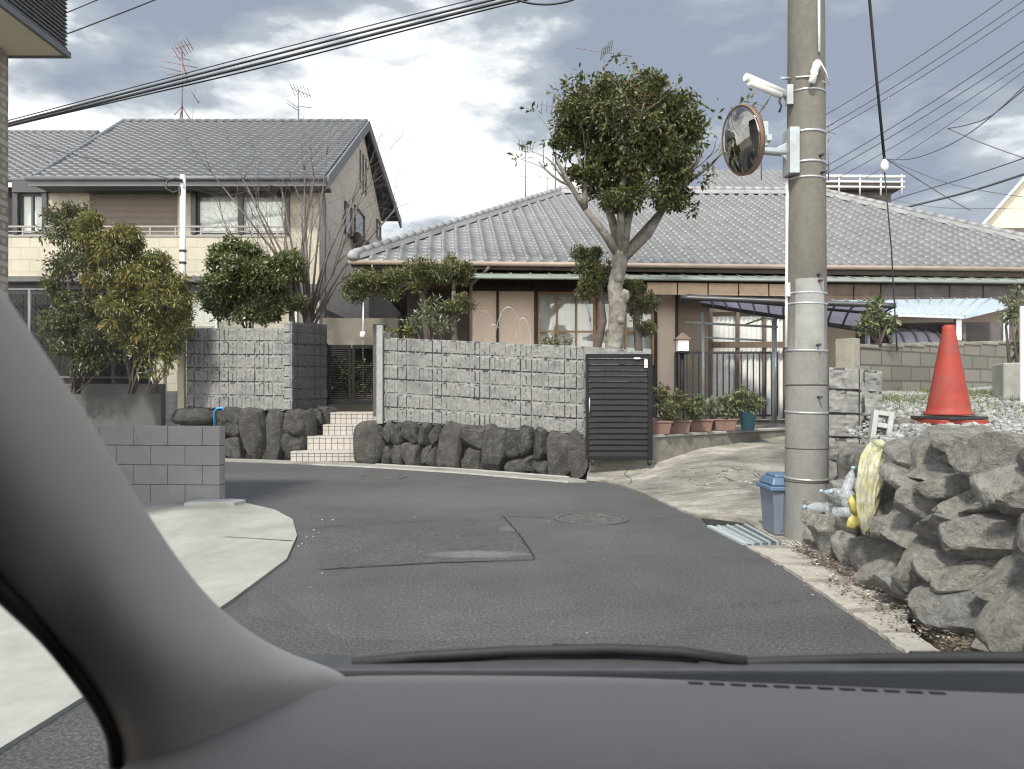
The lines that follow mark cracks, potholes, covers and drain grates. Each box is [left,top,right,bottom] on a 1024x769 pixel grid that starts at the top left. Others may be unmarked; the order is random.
manhole cover [553,512,630,526]
drain grate [707,524,779,546]
crack [664,468,765,495]
